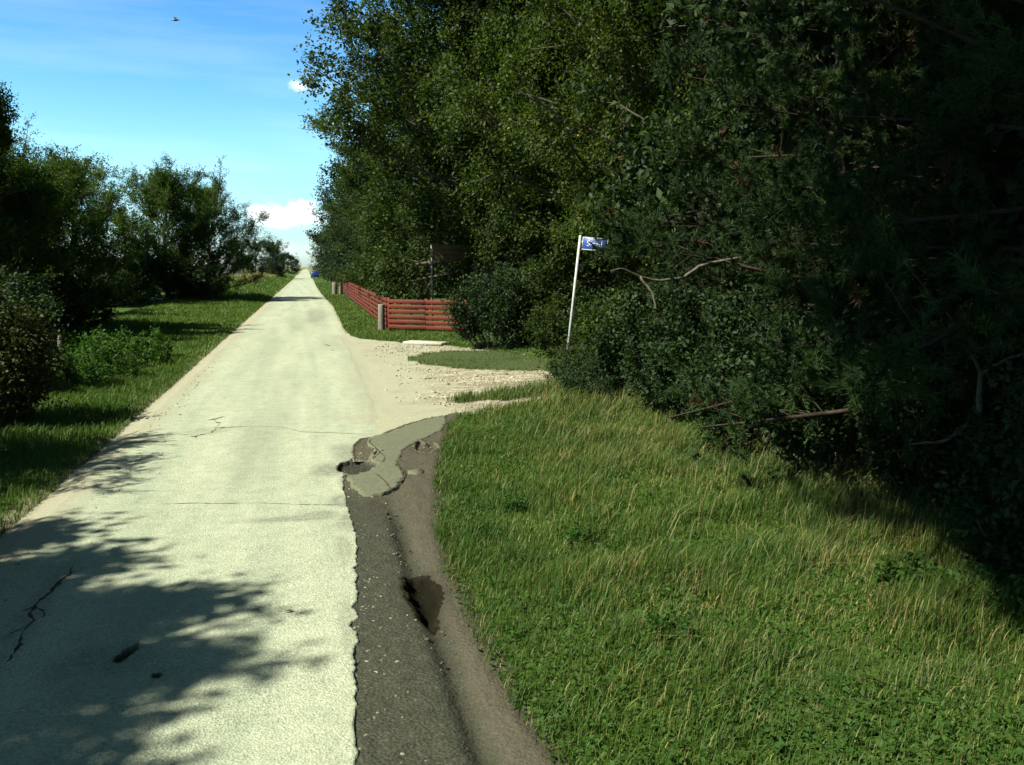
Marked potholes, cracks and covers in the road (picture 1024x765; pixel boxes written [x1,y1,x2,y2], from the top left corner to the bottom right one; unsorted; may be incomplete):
crack [182,416,356,438]
pothole [334,437,377,476]
pothole [111,643,142,665]
crack [5,565,83,664]
pothole [398,575,446,635]
pothole [411,440,441,454]
